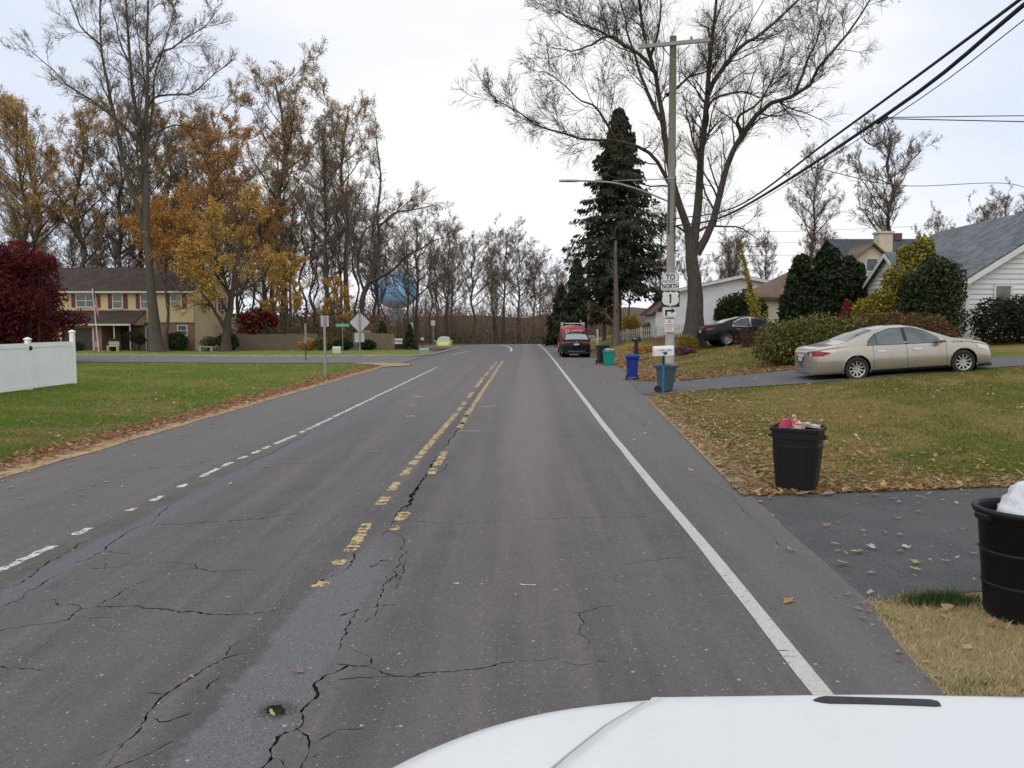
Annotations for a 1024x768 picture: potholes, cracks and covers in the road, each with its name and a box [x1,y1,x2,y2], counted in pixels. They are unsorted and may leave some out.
pothole [264,705,286,717]
crack [261,532,605,768]
crack [0,506,289,608]
crack [0,580,286,631]
crack [98,640,254,768]
